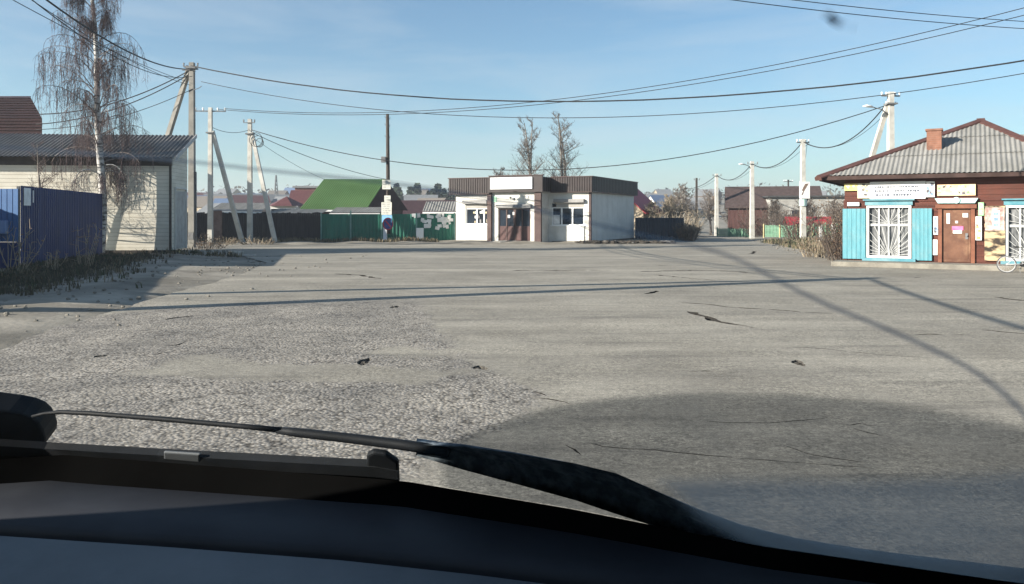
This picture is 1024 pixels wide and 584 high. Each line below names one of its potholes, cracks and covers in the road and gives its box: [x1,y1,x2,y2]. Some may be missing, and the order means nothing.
crack [687,303,831,328]
